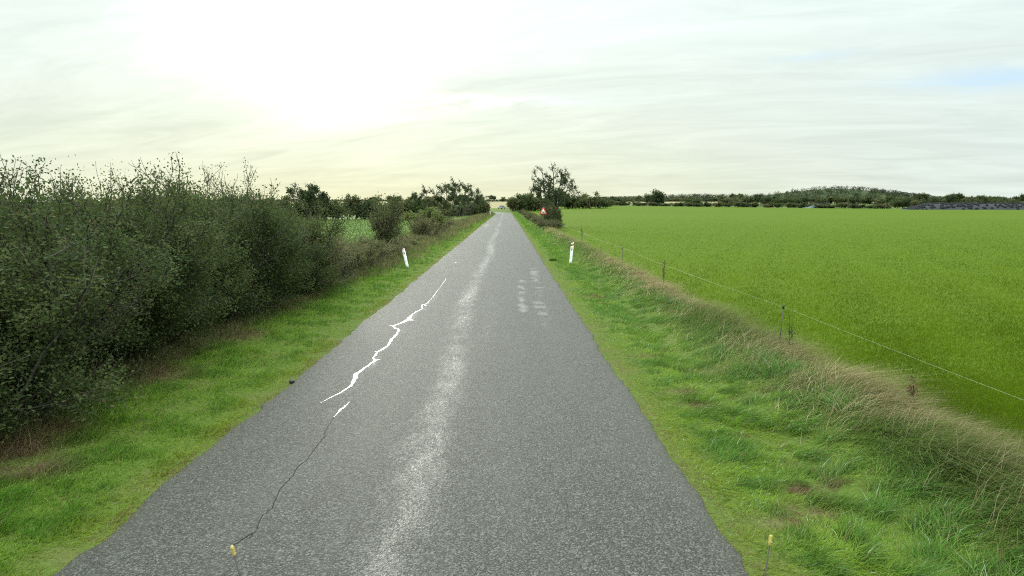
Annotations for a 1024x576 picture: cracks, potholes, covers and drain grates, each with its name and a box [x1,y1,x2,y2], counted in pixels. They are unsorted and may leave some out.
crack [234,278,447,545]
